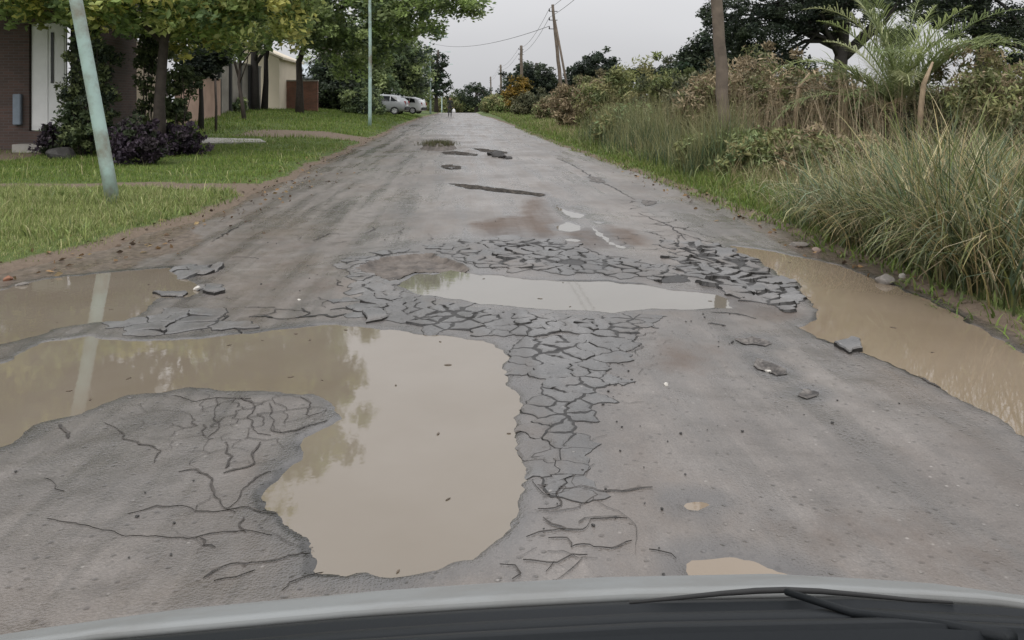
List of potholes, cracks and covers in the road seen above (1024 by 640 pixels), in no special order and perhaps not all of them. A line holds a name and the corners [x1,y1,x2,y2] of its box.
crack [47,393,333,601]
pothole [449,183,545,197]
crack [101,159,808,580]
pothole [398,270,732,313]
pothole [0,325,527,578]
pothole [0,268,200,344]
pothole [731,246,1024,436]
